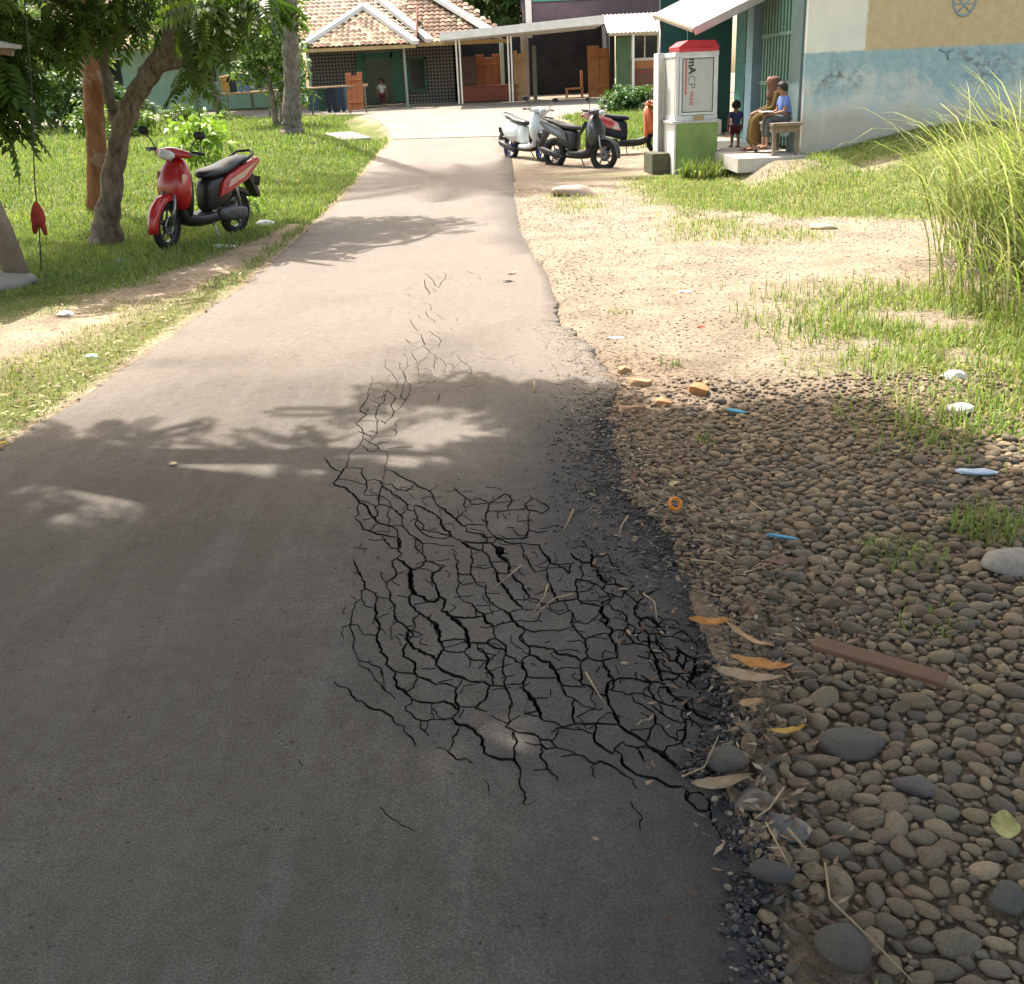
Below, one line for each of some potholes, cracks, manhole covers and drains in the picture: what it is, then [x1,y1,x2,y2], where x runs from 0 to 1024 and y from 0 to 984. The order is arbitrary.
crack [324,353,722,838]
crack [388,305,517,384]
